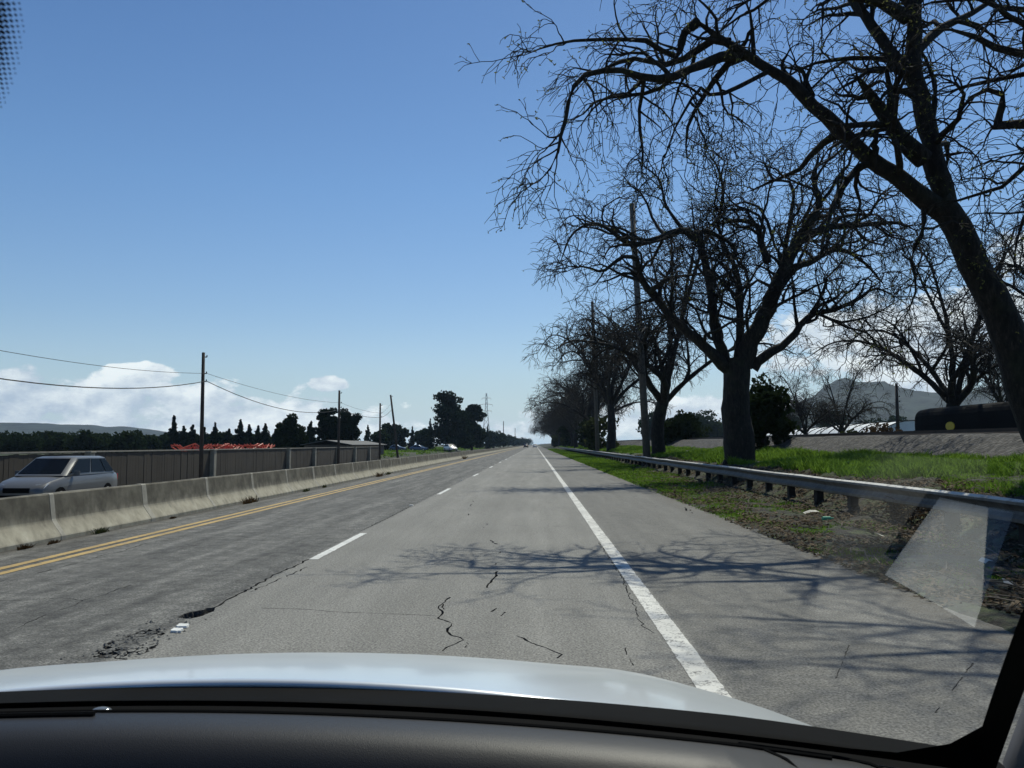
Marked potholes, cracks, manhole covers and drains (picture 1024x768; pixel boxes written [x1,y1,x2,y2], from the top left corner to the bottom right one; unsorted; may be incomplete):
crack [598,542,654,633]
crack [0,582,130,629]
crack [275,597,469,651]
crack [468,501,501,588]
crack [517,636,563,658]
pothole [179,607,216,618]
